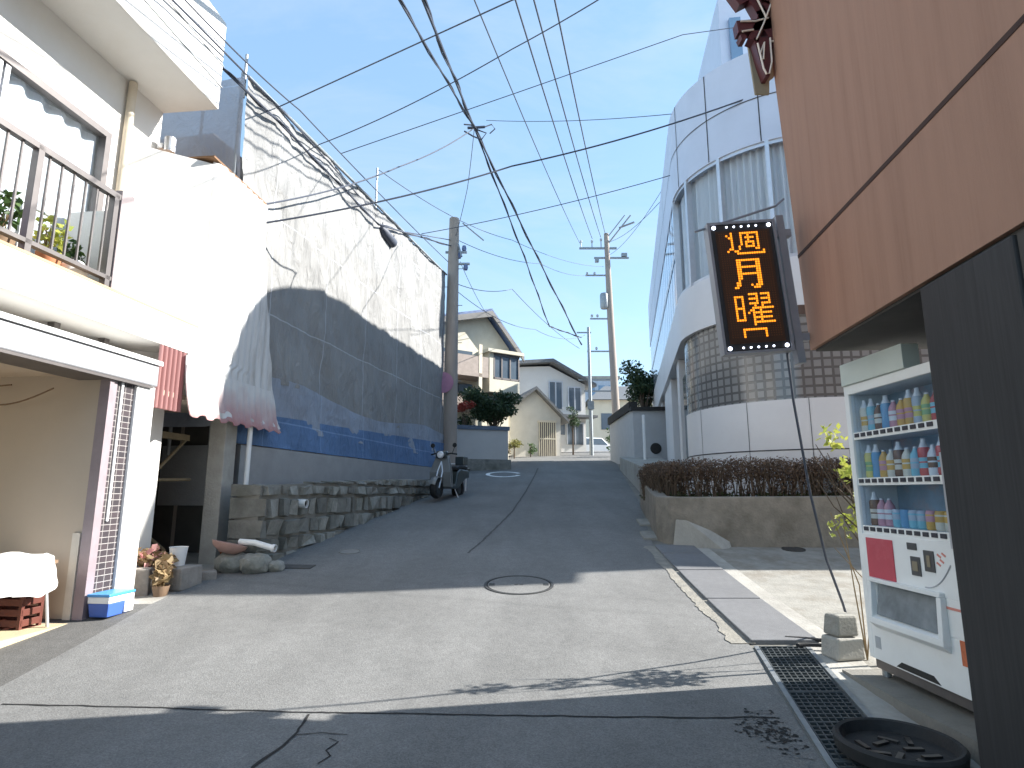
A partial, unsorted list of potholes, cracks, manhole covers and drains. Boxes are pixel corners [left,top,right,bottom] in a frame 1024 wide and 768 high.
manhole cover [484,575,554,595]
drain grate [754,646,873,768]
